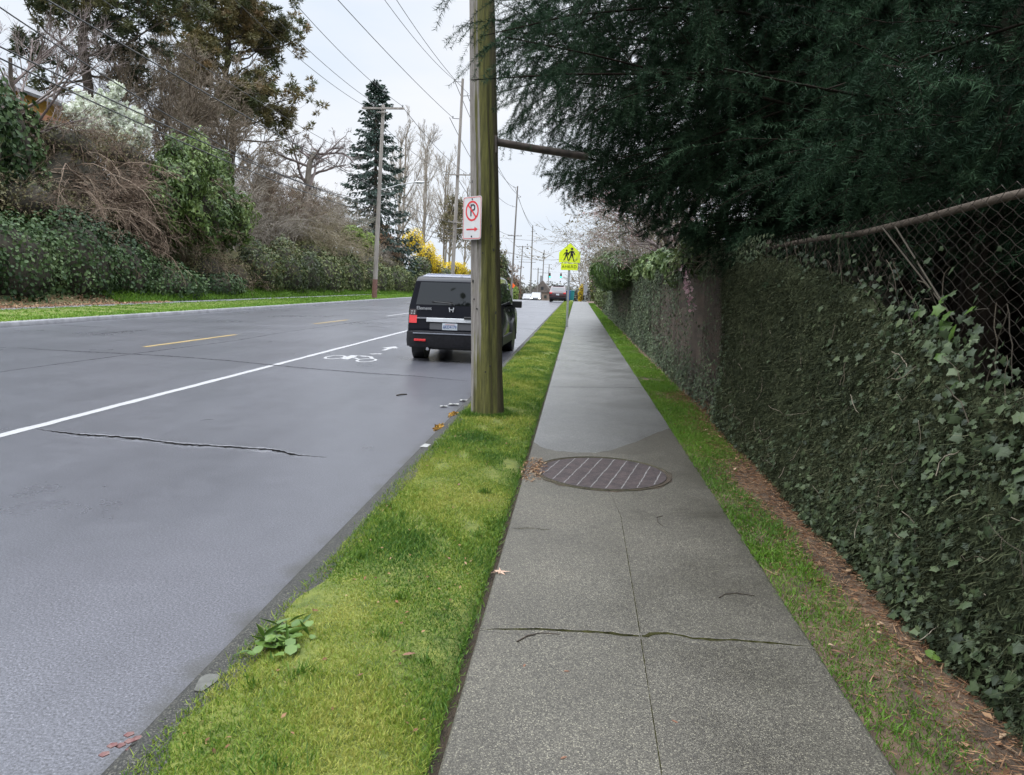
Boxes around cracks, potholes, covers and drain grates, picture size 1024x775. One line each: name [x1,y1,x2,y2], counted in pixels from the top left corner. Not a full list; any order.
crack [480,623,815,650]
crack [36,419,323,458]
manhole cover [533,456,672,492]
